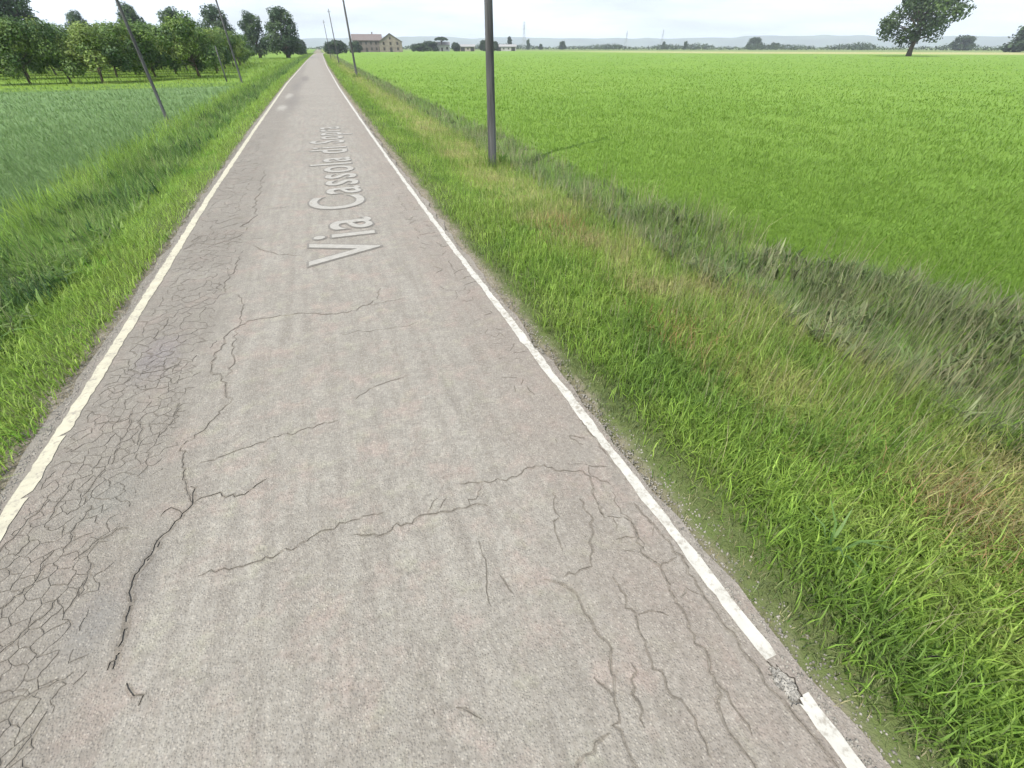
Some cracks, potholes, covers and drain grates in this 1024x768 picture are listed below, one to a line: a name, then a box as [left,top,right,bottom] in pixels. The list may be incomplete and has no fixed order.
crack [202,184,756,768]
crack [0,135,386,768]
pothole [766,661,803,705]
